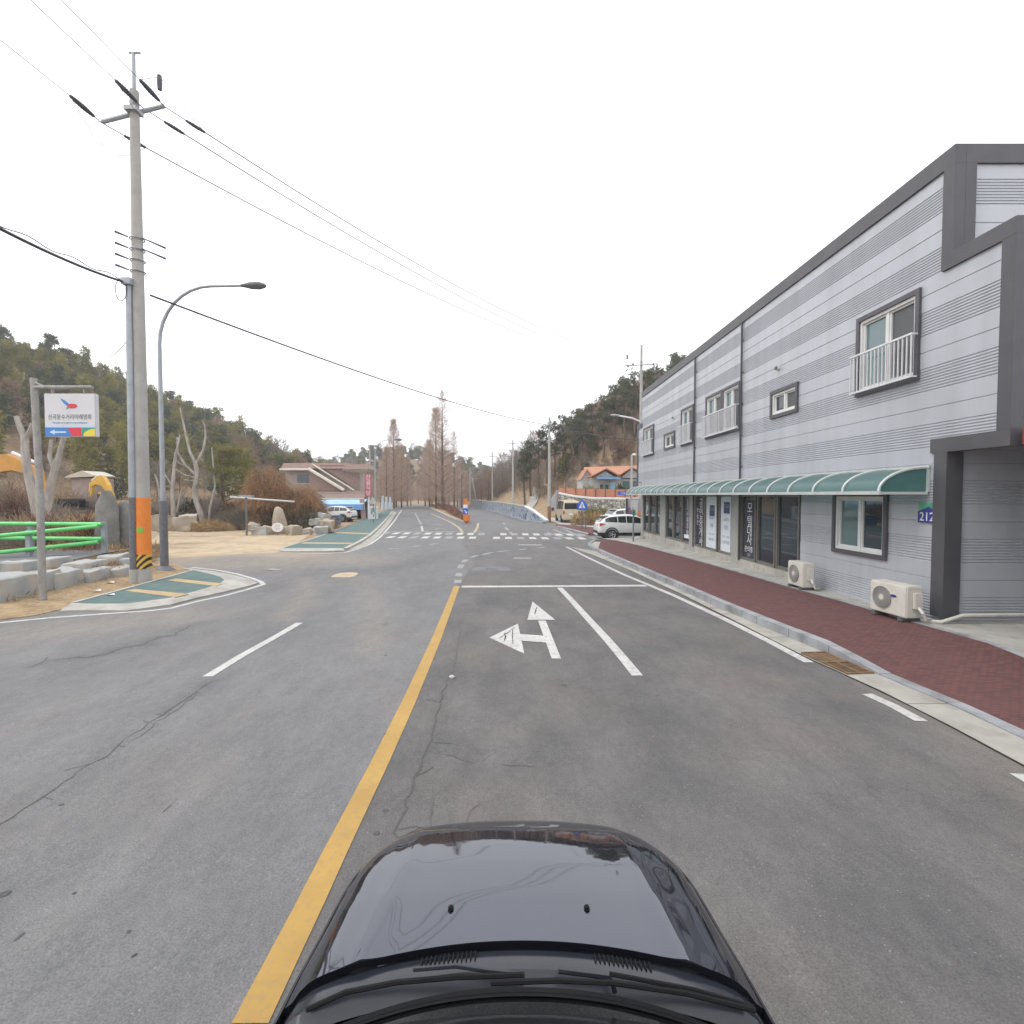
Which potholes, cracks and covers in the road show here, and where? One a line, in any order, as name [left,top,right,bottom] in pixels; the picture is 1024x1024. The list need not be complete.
crack [393,628,472,839]
drain grate [823,661,875,675]
crack [0,682,210,824]
drain grate [801,651,846,663]
